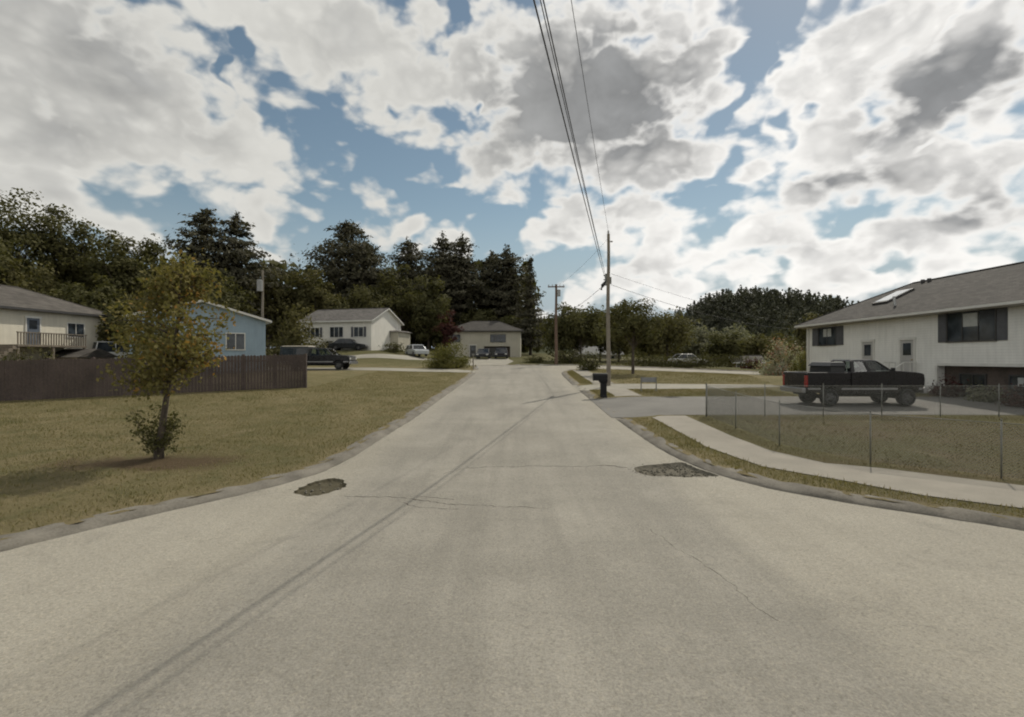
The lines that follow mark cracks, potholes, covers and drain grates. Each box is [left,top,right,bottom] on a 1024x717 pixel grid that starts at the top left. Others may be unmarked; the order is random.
pothole [628,459,719,478]
crack [446,465,627,473]
pothole [290,476,347,496]
crack [650,529,780,622]
crack [347,496,532,509]
